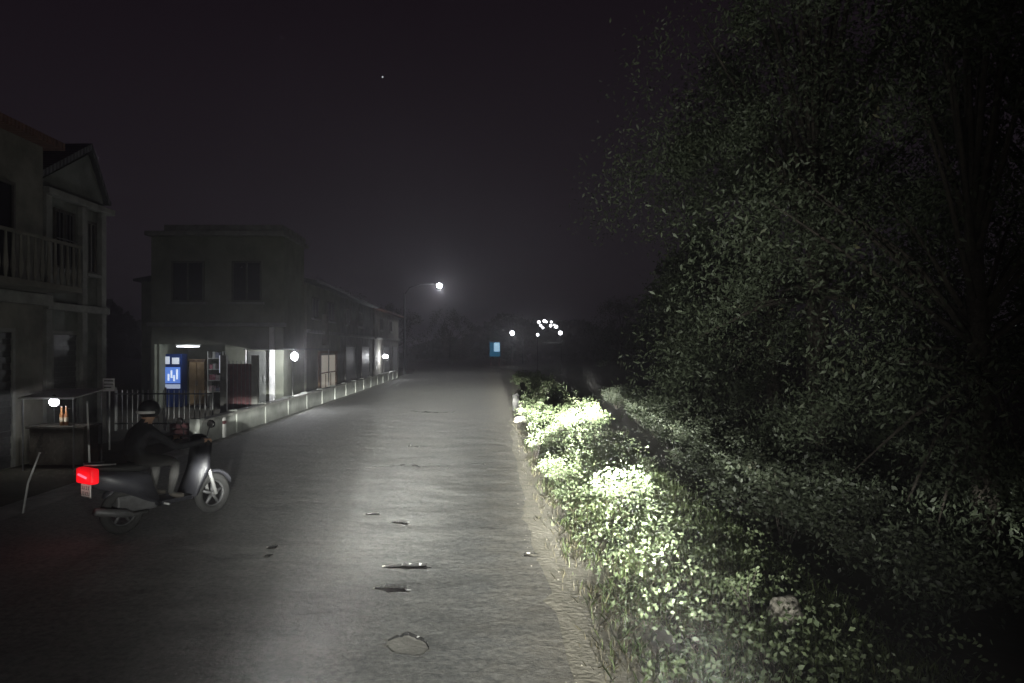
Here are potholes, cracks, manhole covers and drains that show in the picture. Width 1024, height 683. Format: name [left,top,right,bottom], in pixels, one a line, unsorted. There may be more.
pothole [371,584,411,594]
pothole [382,632,431,657]
pothole [381,562,432,570]
